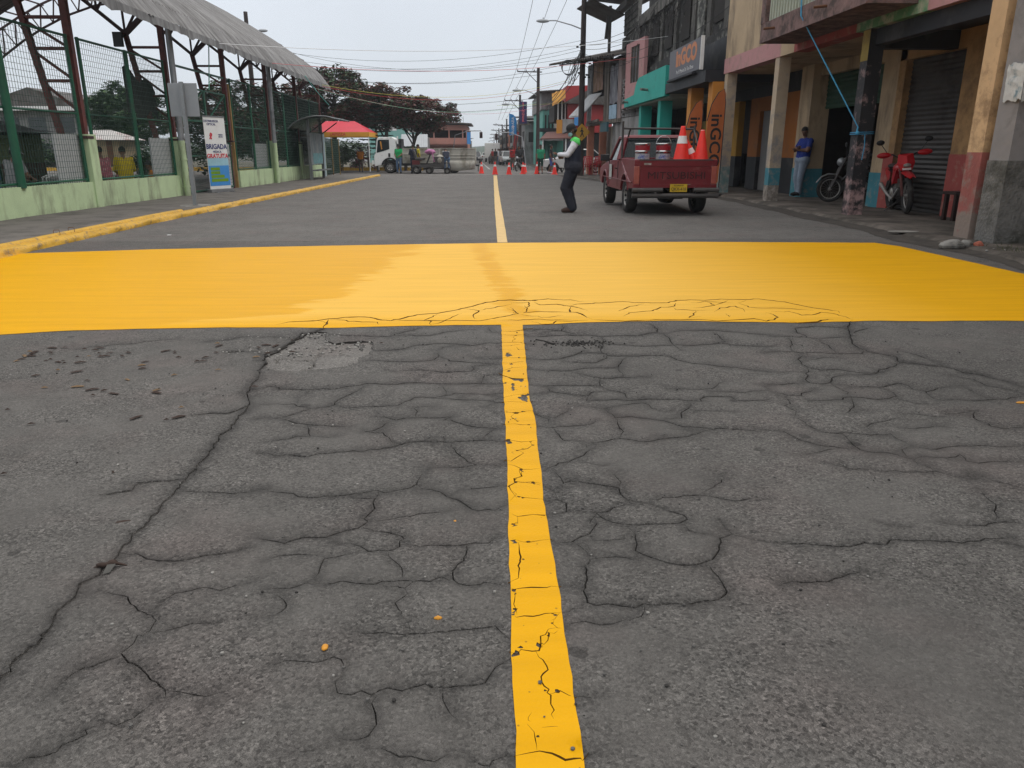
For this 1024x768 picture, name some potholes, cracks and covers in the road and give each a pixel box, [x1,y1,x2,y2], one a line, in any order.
pothole [264,332,373,371]
crack [17,299,1022,767]
